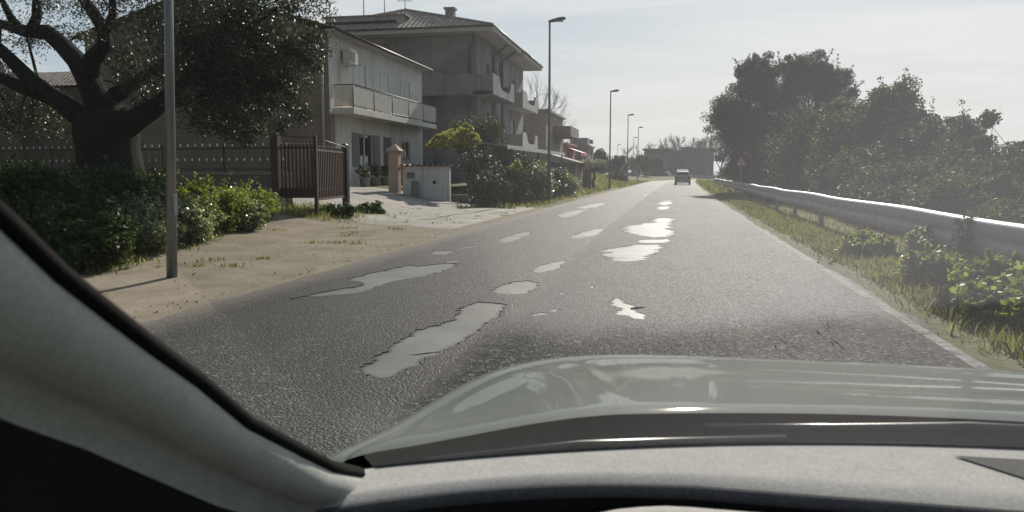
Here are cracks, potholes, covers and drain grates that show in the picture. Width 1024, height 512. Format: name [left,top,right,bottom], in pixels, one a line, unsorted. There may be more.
pothole [359,302,508,378]
pothole [556,209,588,218]
pothole [601,244,664,261]
pothole [610,298,648,319]
pothole [619,218,677,238]
pothole [569,228,605,238]
pothole [530,261,567,273]
pothole [497,232,532,243]
pothole [491,280,539,294]
pothole [292,263,456,299]
